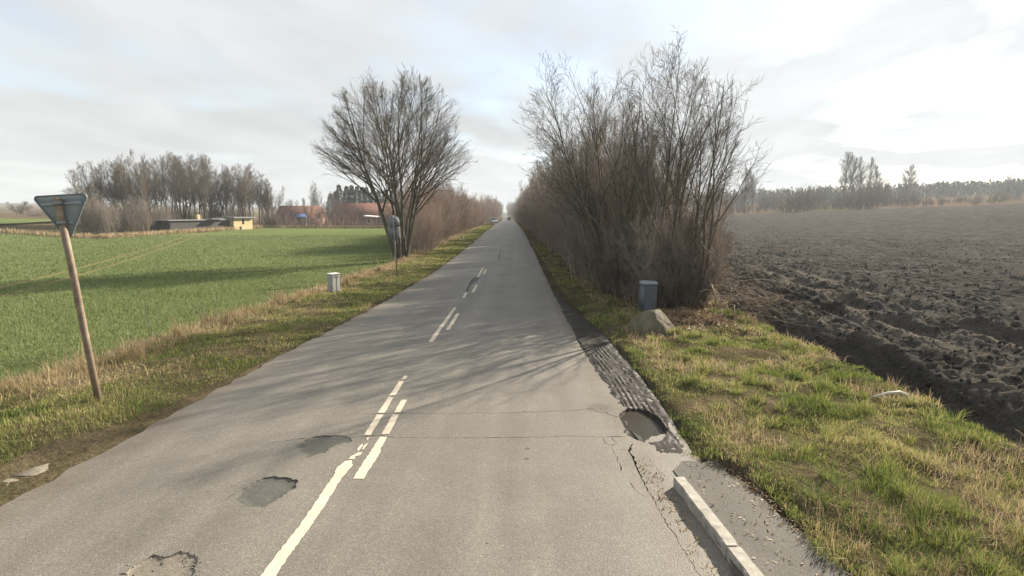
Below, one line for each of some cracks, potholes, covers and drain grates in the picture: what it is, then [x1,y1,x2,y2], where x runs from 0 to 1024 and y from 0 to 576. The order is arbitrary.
crack [273,435,701,576]
pothole [235,476,298,507]
pothole [121,548,201,576]
pothole [296,435,353,458]
